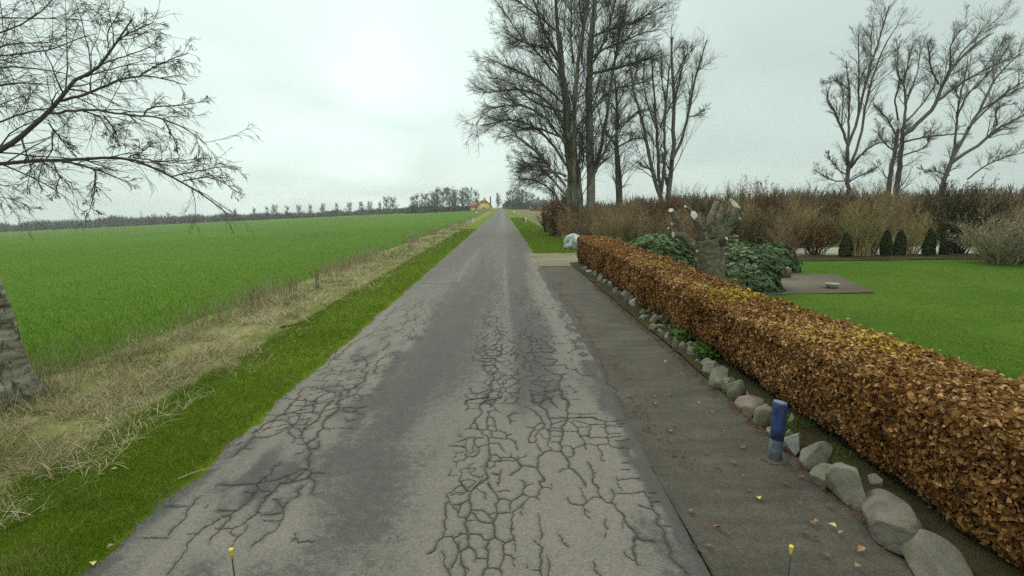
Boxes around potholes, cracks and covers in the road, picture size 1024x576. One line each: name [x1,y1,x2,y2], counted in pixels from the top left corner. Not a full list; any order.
crack [145,299,440,575]
crack [427,276,689,576]
